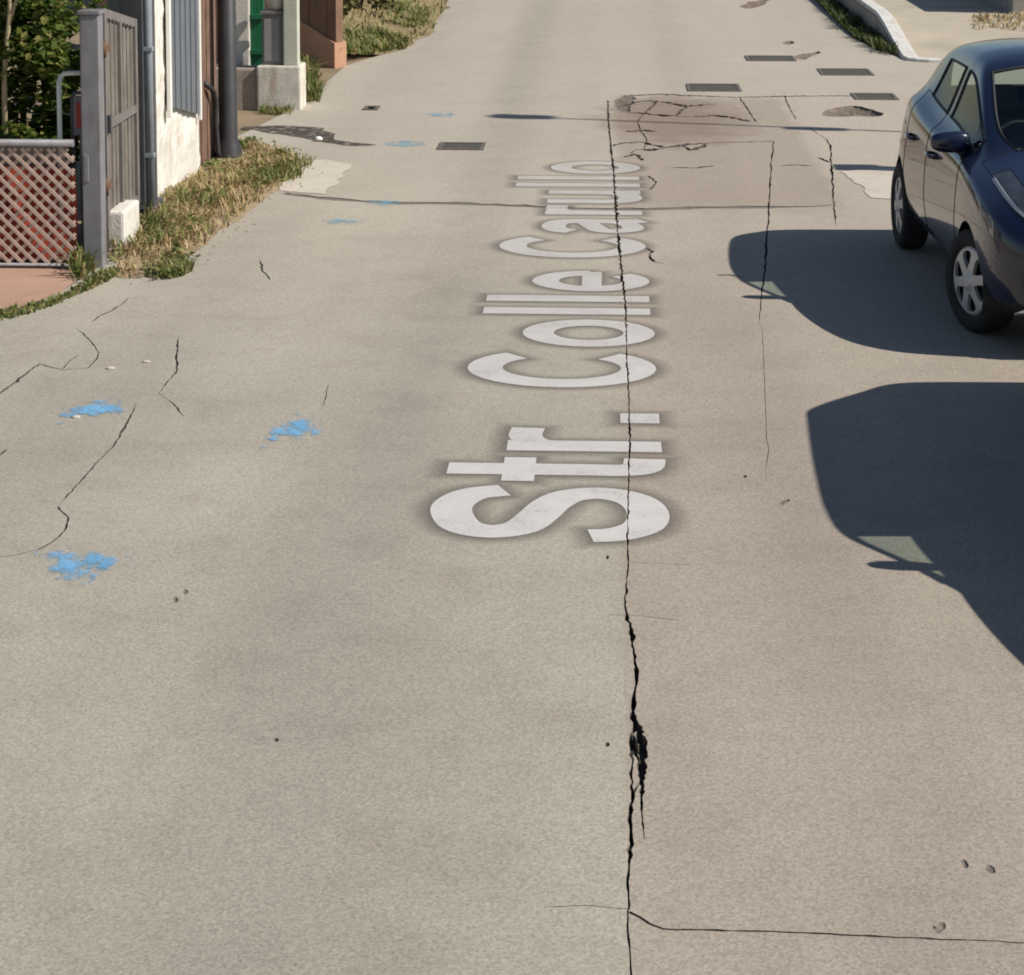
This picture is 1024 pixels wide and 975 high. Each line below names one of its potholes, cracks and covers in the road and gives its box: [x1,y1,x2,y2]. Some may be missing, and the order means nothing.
crack [0,298,128,394]
crack [3,405,136,557]
pothole [822,106,883,117]
crack [552,94,1024,975]
crack [158,340,183,415]
